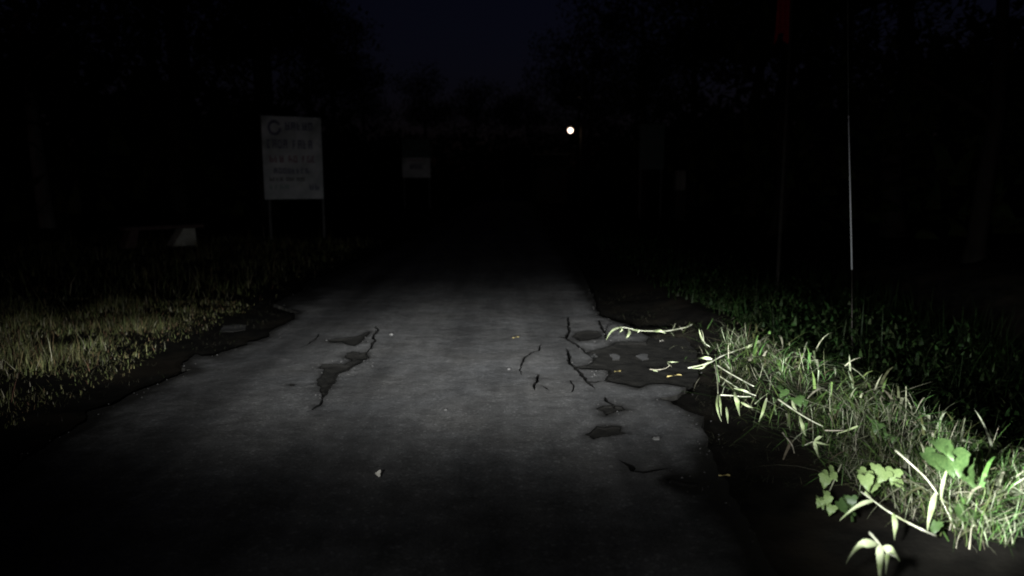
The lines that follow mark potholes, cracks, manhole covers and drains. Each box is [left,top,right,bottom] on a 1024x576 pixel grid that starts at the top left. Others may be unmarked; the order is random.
crack [366,327,379,355]
pothole [597,405,625,416]
crack [519,345,549,390]
pothole [572,331,602,341]
crack [619,460,669,473]
pothole [328,332,370,346]
pothole [579,336,700,389]
pothole [586,426,625,439]
crack [560,318,615,409]
